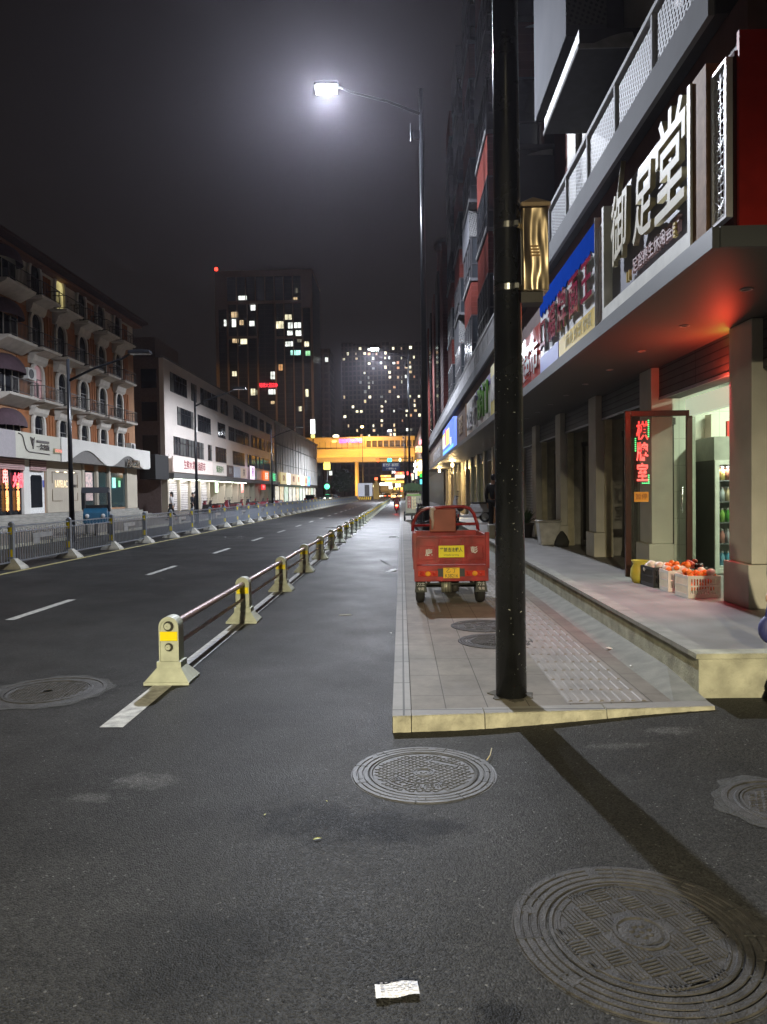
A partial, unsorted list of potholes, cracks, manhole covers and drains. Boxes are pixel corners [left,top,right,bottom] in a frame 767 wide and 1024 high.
manhole cover [511,866,767,1024]
manhole cover [711,775,767,828]
manhole cover [451,620,496,632]
manhole cover [458,633,533,649]
manhole cover [351,747,497,805]
manhole cover [0,675,117,710]
